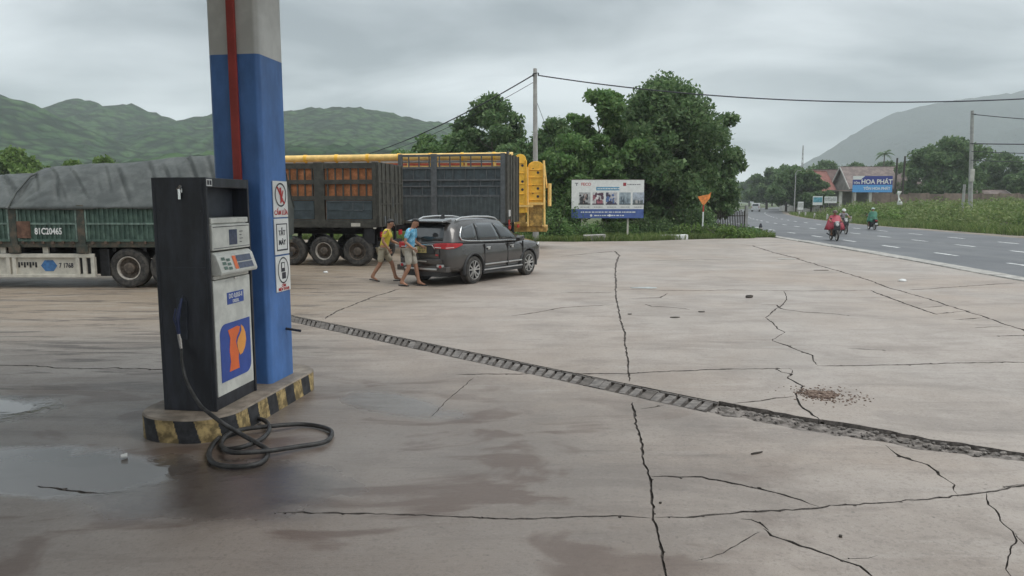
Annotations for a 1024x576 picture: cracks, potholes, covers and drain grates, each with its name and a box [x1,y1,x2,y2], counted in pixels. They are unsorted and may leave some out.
crack [986,494,1024,576]
crack [457,292,849,423]
crack [38,486,105,494]
crack [749,245,1024,336]
crack [888,447,958,495]
drain grate [291,315,718,412]
crack [652,476,874,576]
